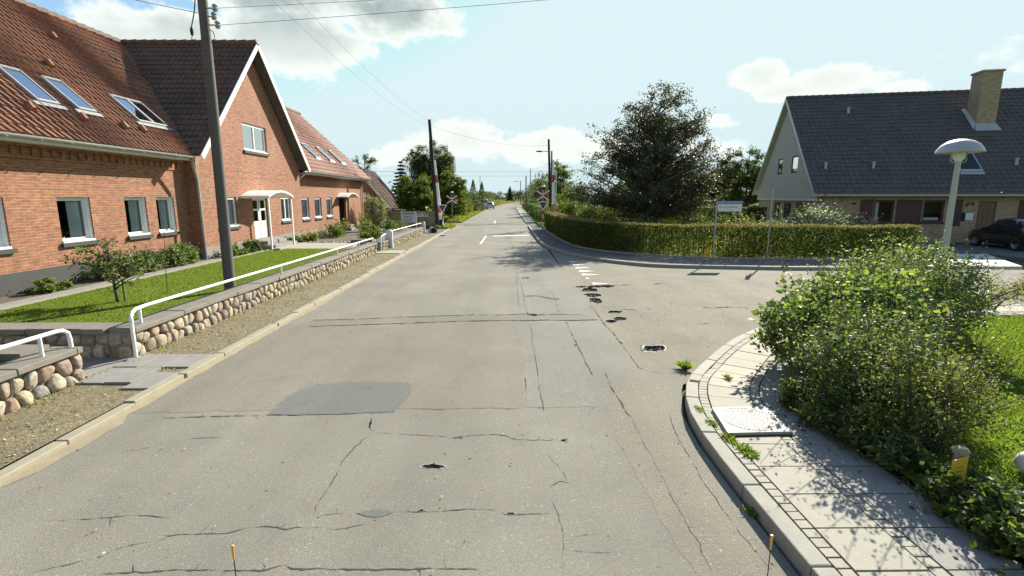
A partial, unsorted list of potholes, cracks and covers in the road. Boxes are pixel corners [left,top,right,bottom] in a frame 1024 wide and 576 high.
pothole [419,461,447,469]
crack [310,284,713,574]
manhole cover [712,406,795,438]
